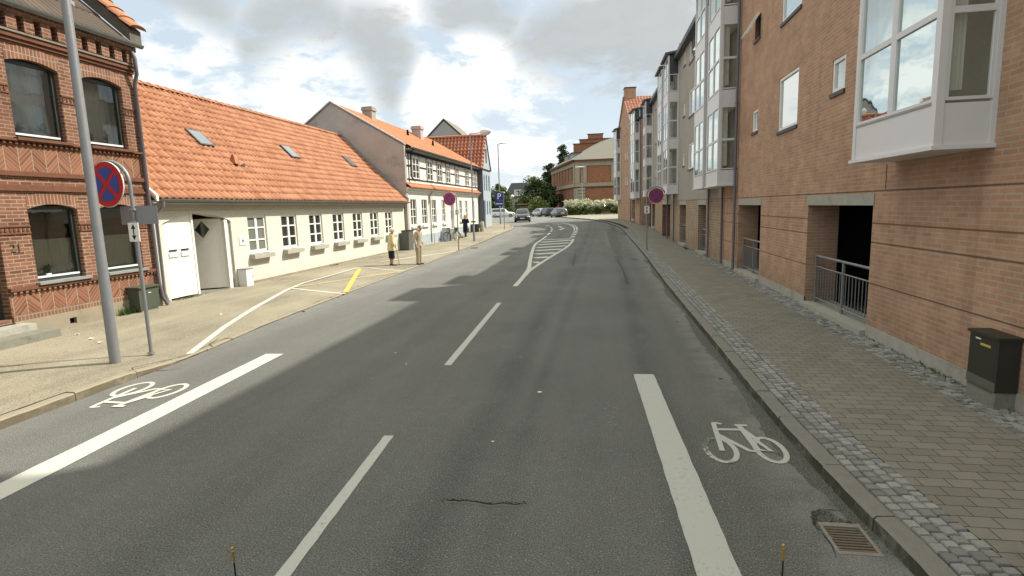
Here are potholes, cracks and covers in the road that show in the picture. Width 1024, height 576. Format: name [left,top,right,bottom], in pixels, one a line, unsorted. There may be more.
drain grate [817,521,885,557]
pothole [811,508,856,531]
crack [444,498,526,507]
